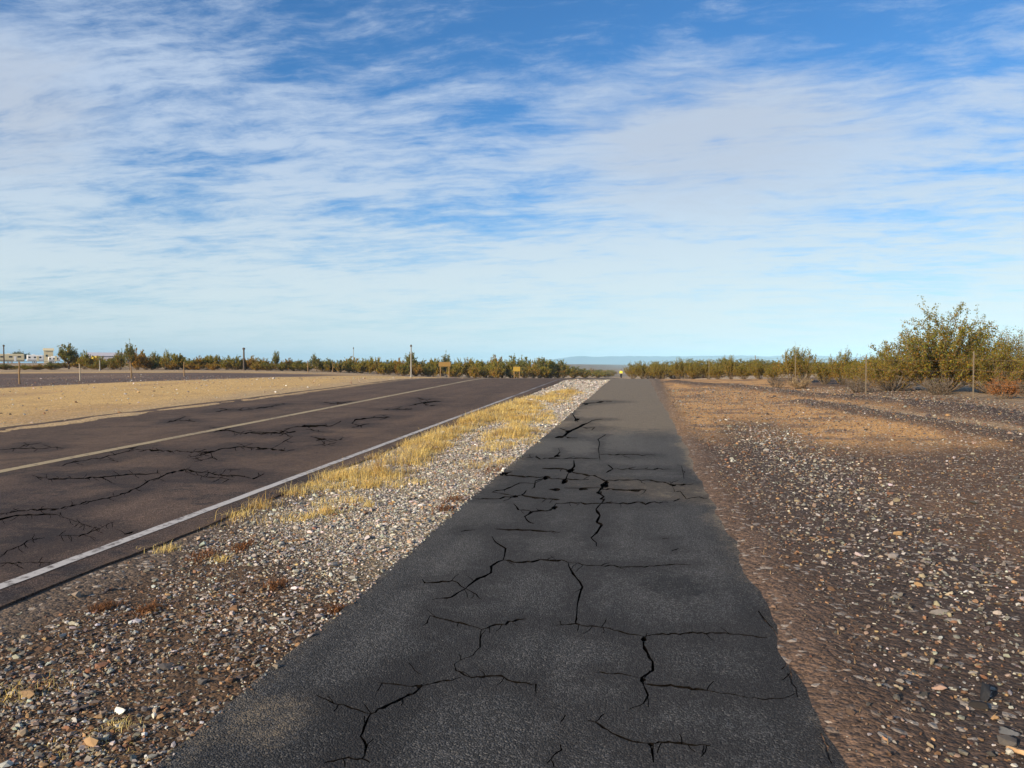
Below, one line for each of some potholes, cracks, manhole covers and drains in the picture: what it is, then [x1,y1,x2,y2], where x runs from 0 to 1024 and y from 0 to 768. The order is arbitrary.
crack [317,401,798,767]
crack [0,398,441,569]
